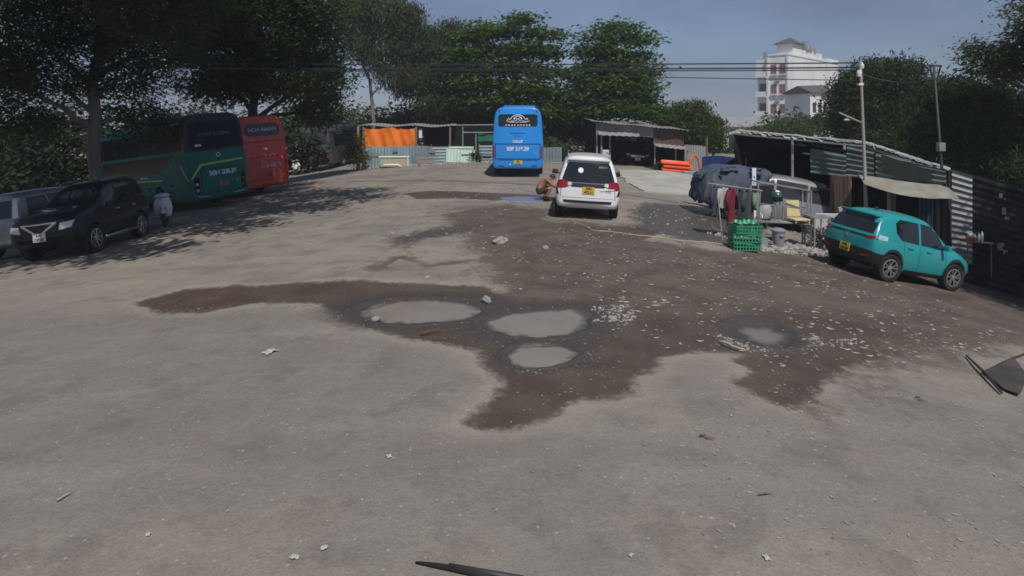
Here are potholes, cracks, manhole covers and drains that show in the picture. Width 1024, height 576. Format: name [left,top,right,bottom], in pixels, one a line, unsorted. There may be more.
pothole [332,294,505,327]
pothole [493,340,592,373]
pothole [468,303,607,341]
pothole [688,312,830,360]
pothole [490,194,555,203]
